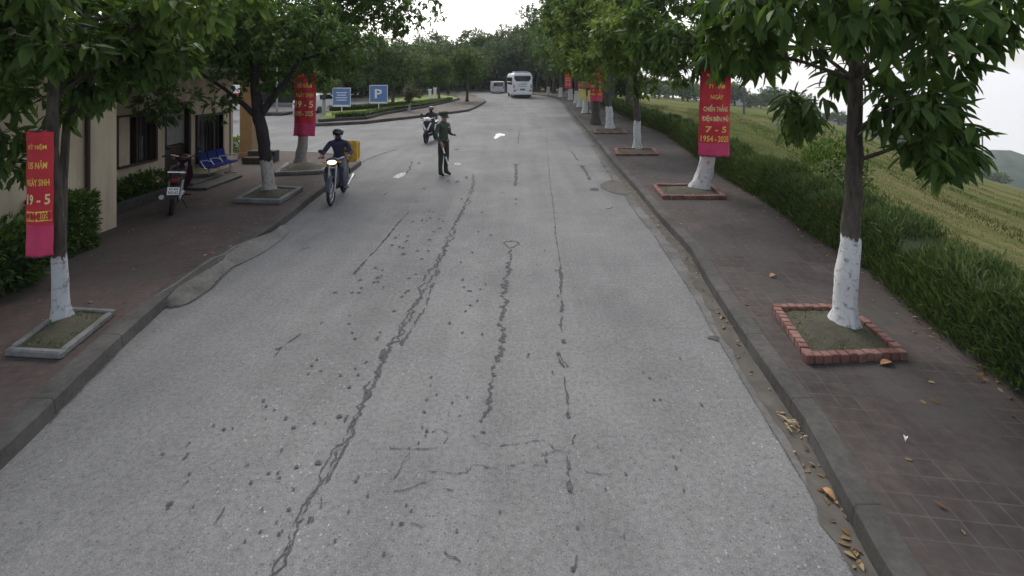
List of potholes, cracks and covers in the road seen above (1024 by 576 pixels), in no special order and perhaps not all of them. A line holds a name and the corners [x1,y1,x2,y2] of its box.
crack [390,241,599,491]
crack [270,174,475,576]
crack [546,132,564,332]
